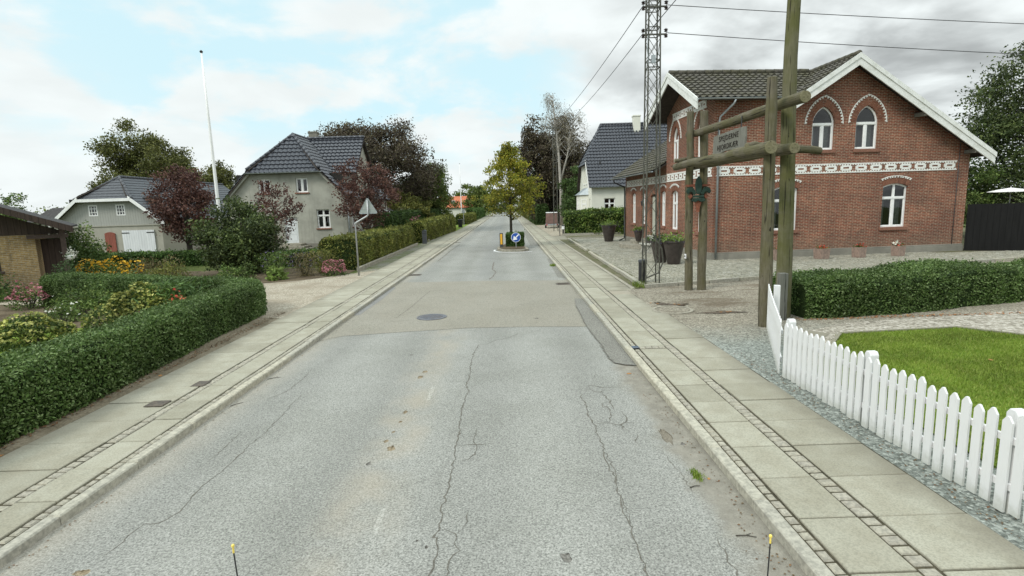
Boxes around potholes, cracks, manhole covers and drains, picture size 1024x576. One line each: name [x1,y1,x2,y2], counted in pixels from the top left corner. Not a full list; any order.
crack [104,375,307,556]
crack [427,334,517,576]
crack [576,307,648,576]
